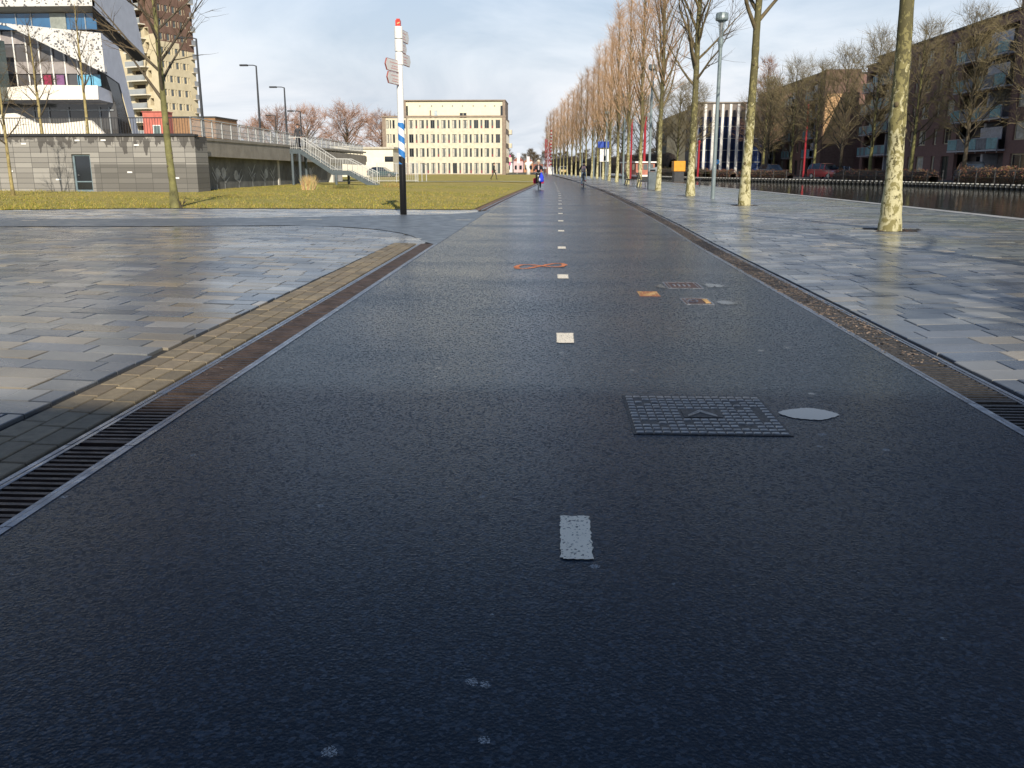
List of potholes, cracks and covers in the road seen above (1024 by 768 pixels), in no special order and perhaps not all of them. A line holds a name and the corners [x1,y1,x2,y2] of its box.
manhole cover [622,395,794,437]
